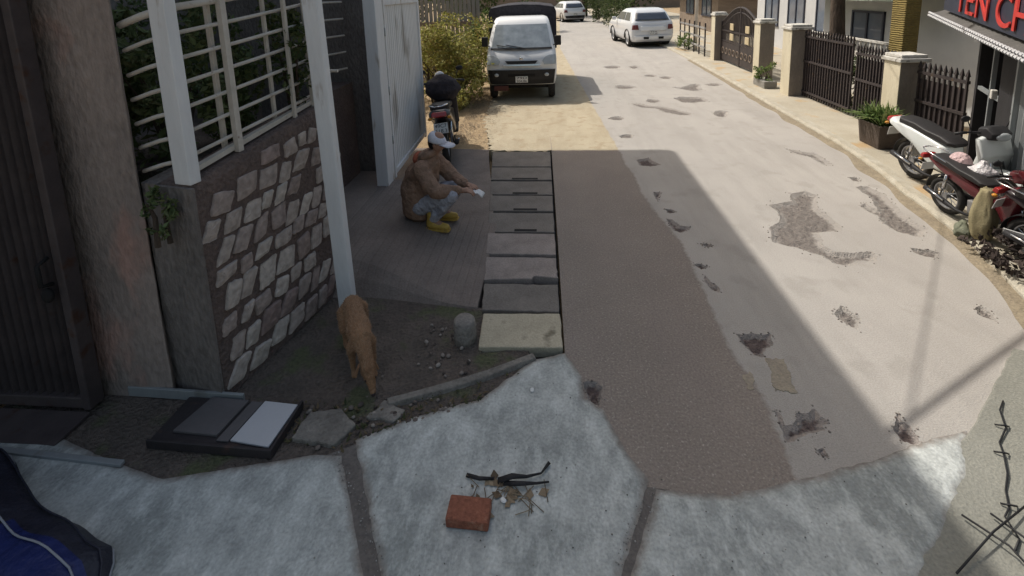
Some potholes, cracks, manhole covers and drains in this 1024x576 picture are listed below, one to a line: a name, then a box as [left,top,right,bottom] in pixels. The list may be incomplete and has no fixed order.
pothole [786,149,832,166]
pothole [666,219,691,233]
pothole [772,404,831,443]
pothole [581,379,605,407]
pothole [974,304,998,323]
pothole [856,185,928,237]
pothole [910,248,939,260]
pothole [763,191,880,273]
pothole [831,305,862,333]
pothole [889,412,923,445]
pothole [733,332,775,358]
pothole [637,157,661,166]
